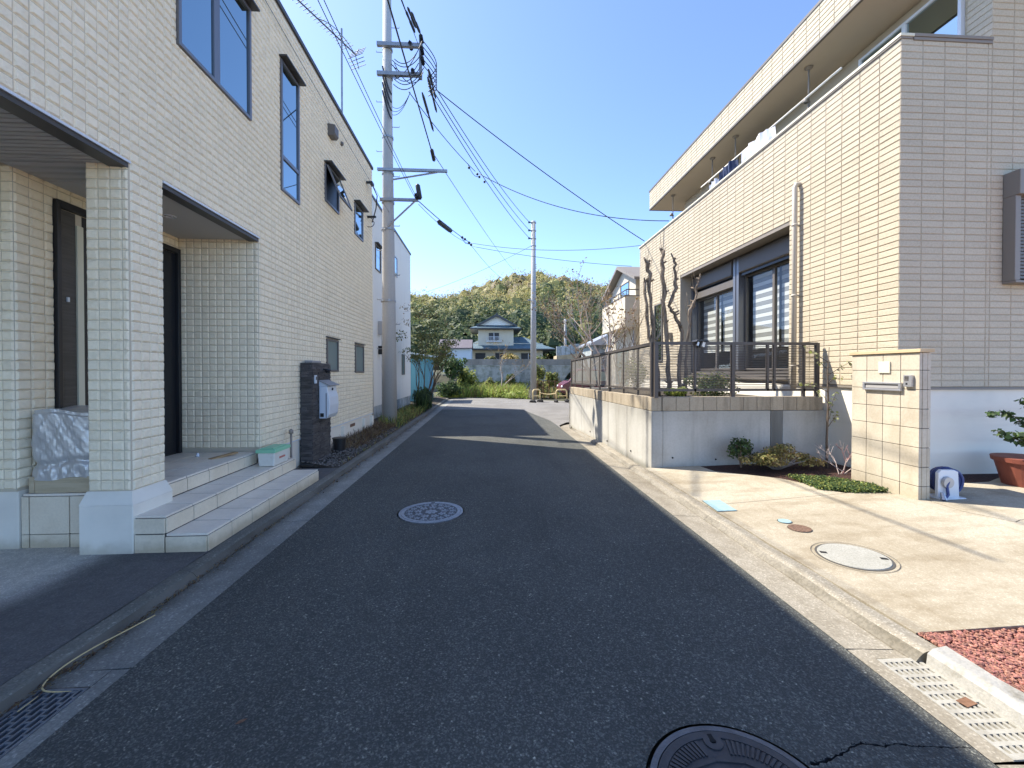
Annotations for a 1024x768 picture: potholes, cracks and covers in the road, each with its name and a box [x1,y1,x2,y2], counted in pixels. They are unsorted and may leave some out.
crack [810,741,970,766]
drain grate [876,658,1024,765]
utility cover [810,542,901,573]
manhole cover [648,726,807,768]
drain grate [0,687,89,759]
manhole cover [398,502,464,524]
